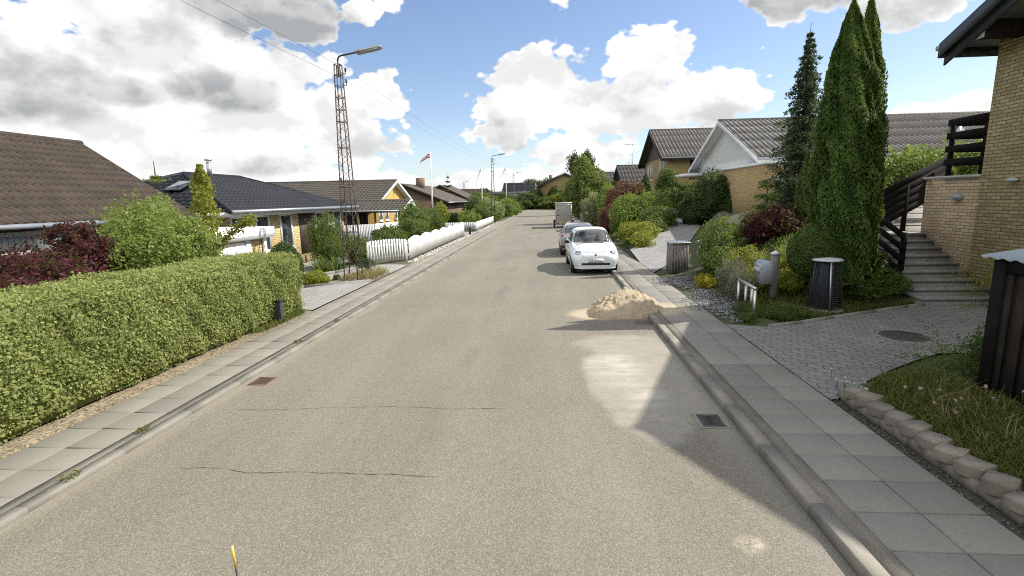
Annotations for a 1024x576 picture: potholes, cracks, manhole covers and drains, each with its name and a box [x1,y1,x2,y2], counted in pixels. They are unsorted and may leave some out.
crack [177,467,418,476]
manhole cover [878,330,931,341]
